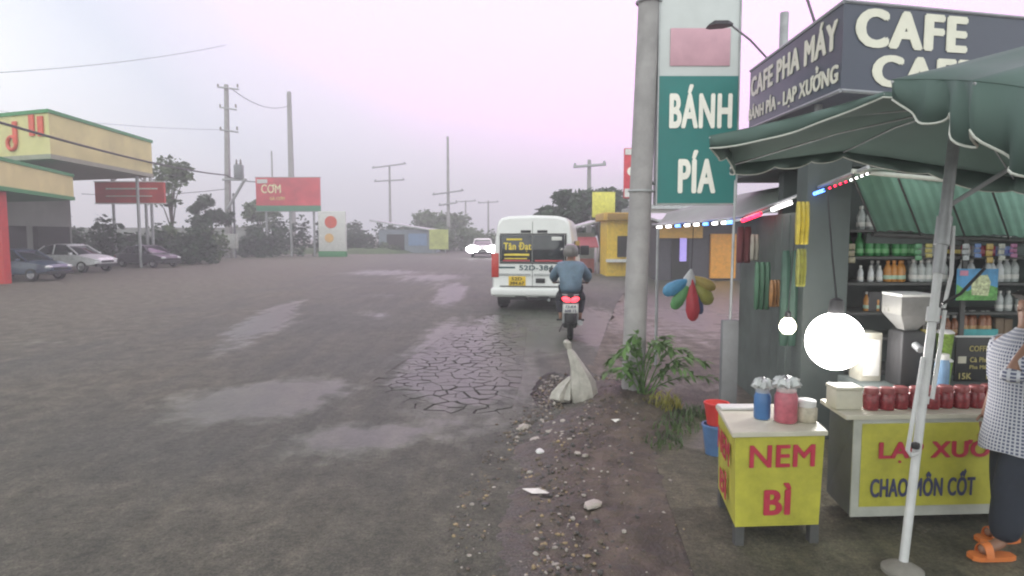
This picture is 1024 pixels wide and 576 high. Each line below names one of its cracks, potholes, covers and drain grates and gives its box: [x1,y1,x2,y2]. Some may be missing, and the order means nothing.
crack [372,314,527,413]
